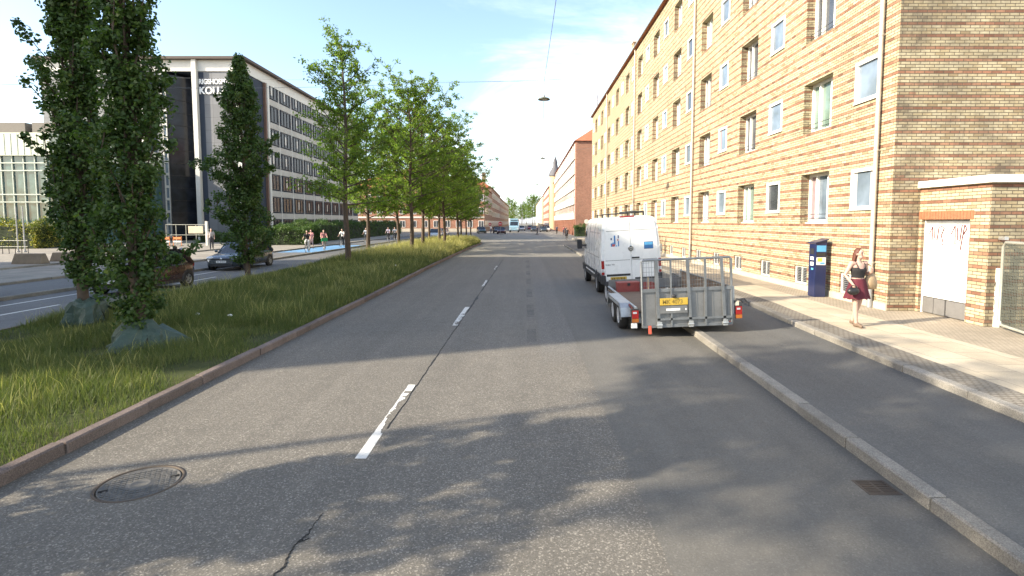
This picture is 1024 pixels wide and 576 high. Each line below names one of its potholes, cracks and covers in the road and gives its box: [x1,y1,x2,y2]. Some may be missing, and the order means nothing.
manhole cover [90,465,186,503]
drain grate [851,480,903,495]
crack [273,513,323,576]
